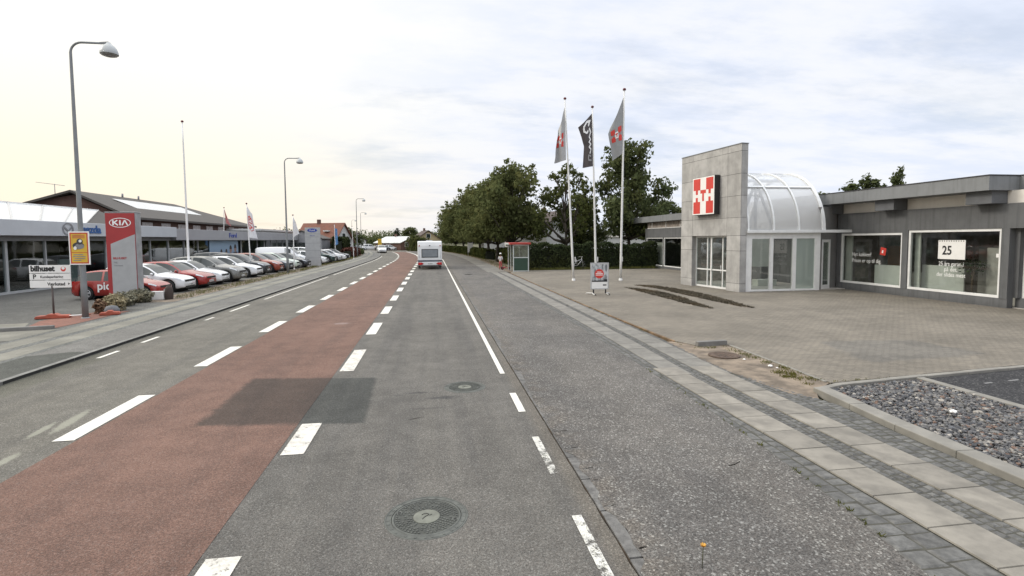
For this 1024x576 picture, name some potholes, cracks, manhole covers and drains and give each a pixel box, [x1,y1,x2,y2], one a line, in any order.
manhole cover [444,381,485,393]
manhole cover [384,496,468,540]
manhole cover [708,351,740,359]
